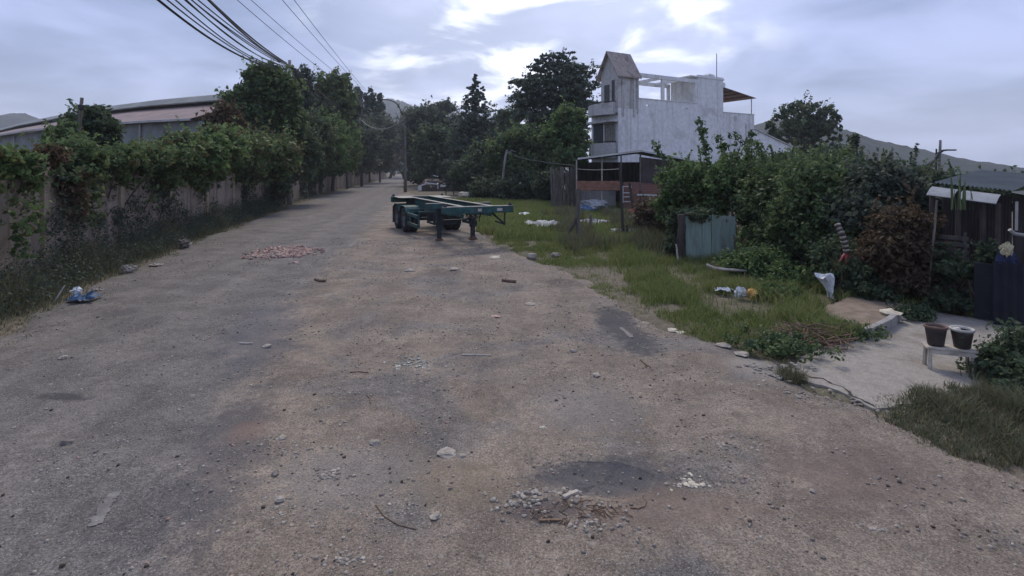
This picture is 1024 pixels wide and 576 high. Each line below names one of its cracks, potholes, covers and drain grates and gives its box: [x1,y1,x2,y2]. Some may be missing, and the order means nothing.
crack [807,375,885,408]
